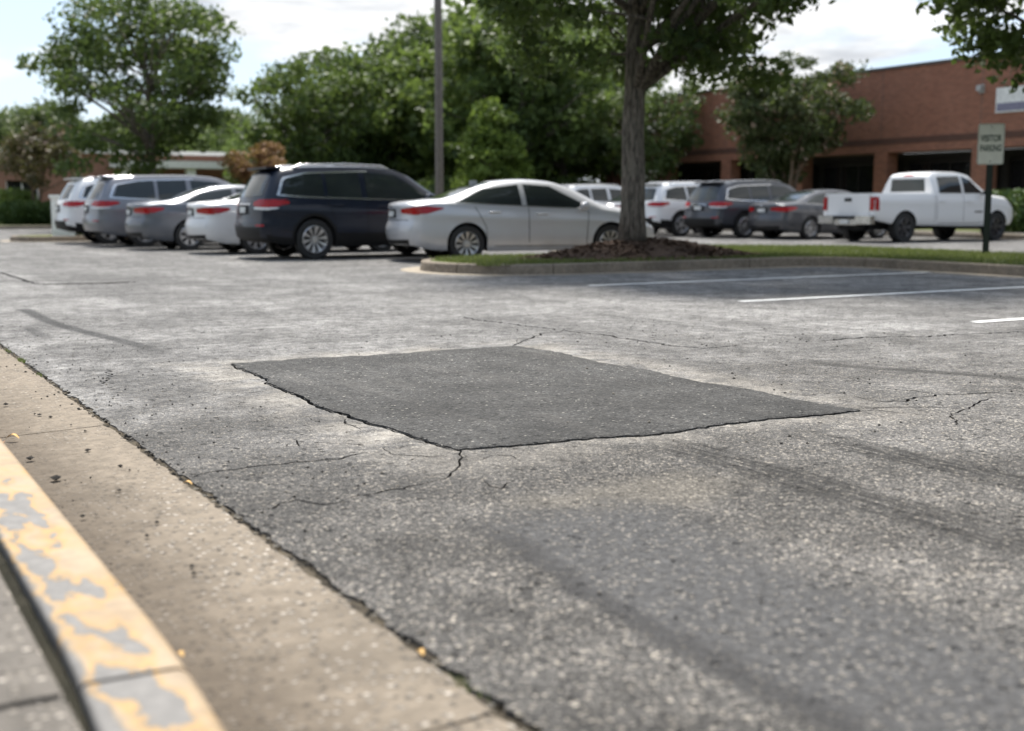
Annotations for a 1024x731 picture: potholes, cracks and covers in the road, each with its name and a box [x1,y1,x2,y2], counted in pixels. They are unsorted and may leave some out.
crack [0,344,846,731]
crack [890,394,989,425]
crack [463,317,729,348]
